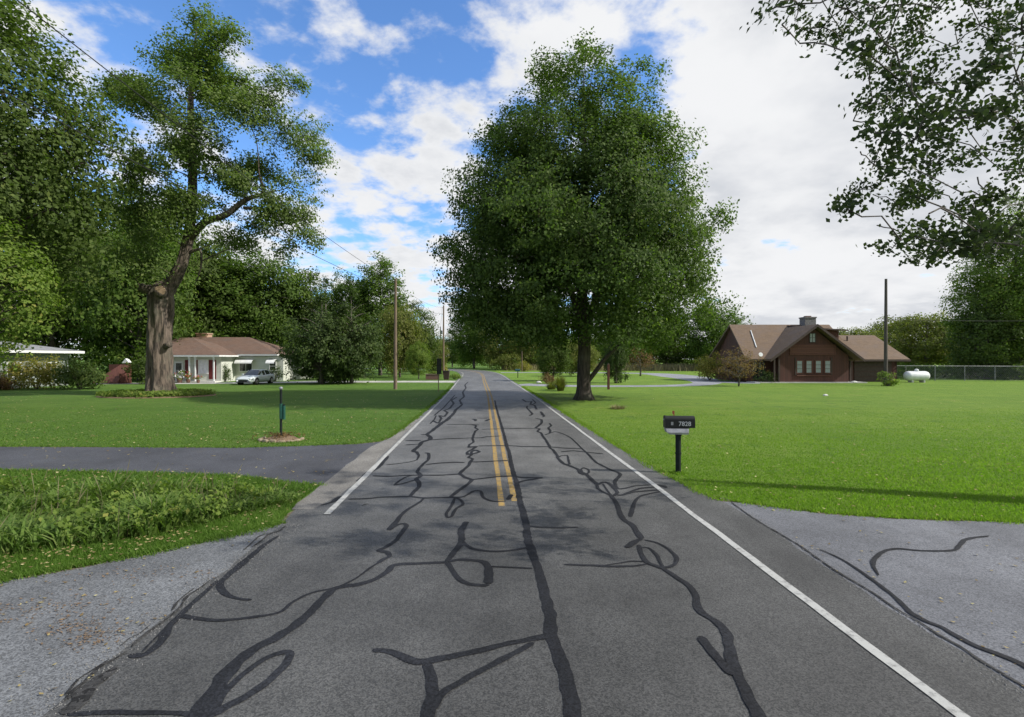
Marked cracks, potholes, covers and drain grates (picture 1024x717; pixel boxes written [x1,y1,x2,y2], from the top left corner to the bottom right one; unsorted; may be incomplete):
crack [64,580,210,701]
crack [244,525,286,550]
